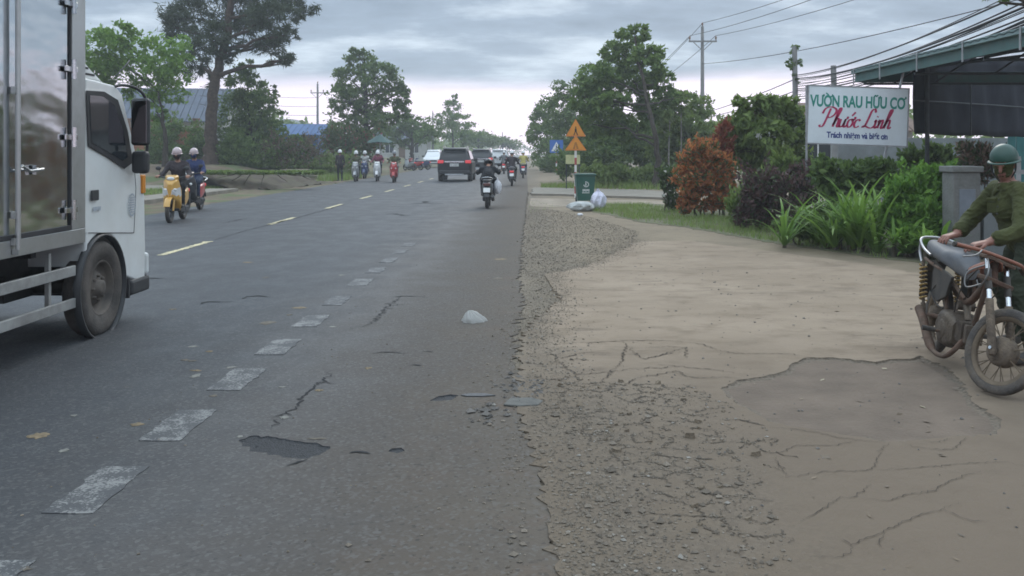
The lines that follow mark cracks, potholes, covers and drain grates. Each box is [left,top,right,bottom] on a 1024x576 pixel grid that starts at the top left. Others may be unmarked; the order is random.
crack [534,340,803,567]
crack [360,296,422,327]
pothole [239,435,330,459]
crack [775,427,1014,558]
crack [270,374,332,429]
